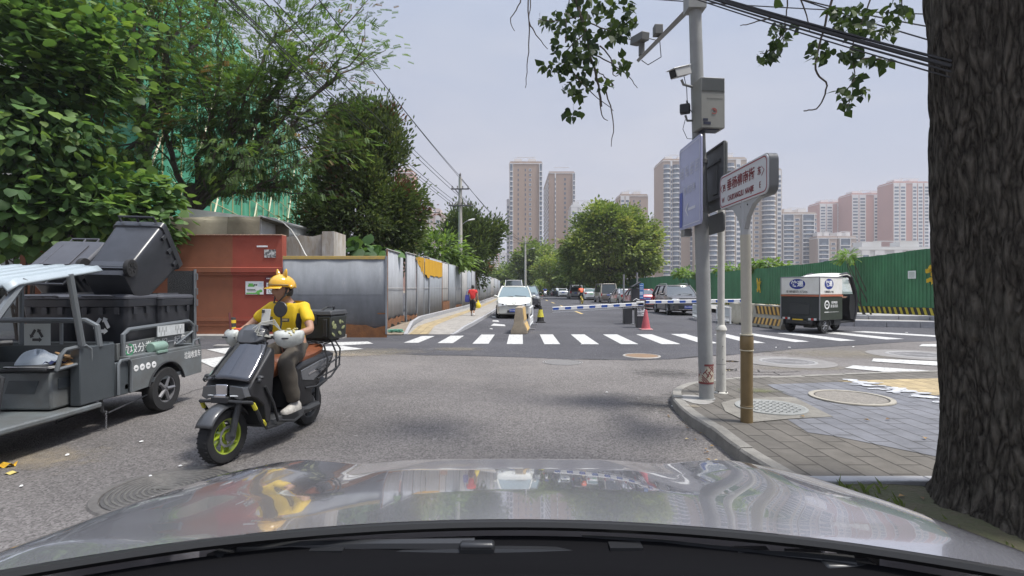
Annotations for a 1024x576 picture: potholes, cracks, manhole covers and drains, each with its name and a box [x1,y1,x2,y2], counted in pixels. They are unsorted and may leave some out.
manhole cover [753,356,838,368]
manhole cover [808,389,897,406]
manhole cover [86,466,236,516]
manhole cover [865,349,937,361]
